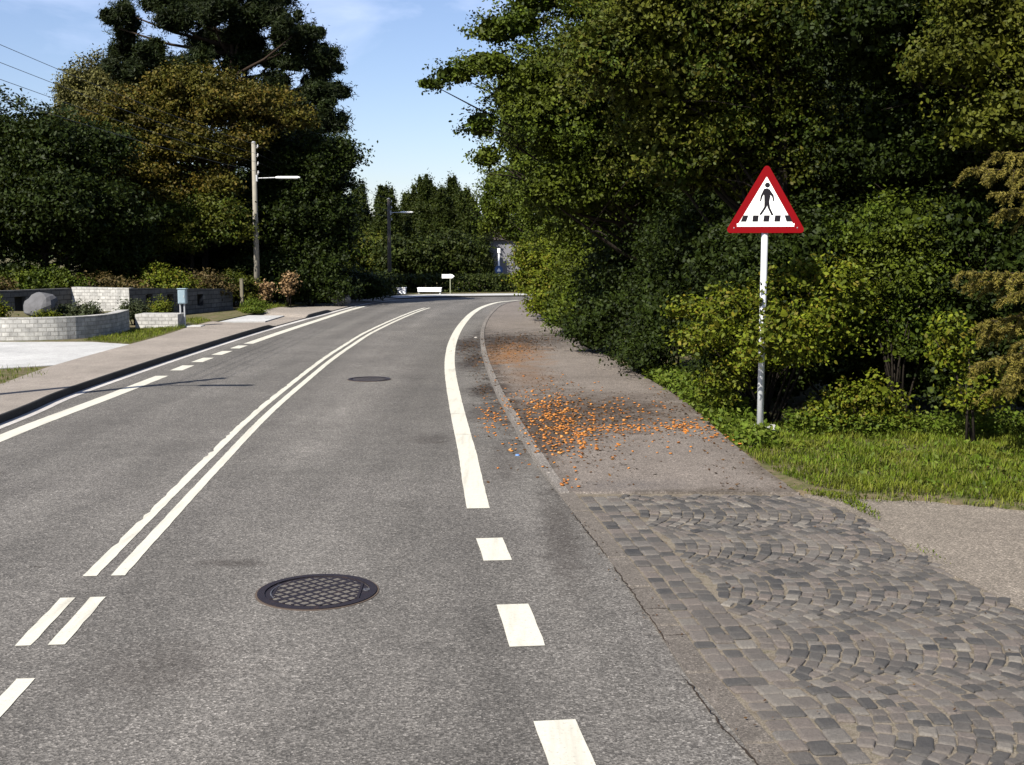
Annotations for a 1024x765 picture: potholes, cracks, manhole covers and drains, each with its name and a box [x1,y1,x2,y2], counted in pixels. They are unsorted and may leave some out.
manhole cover [255,574,379,611]
